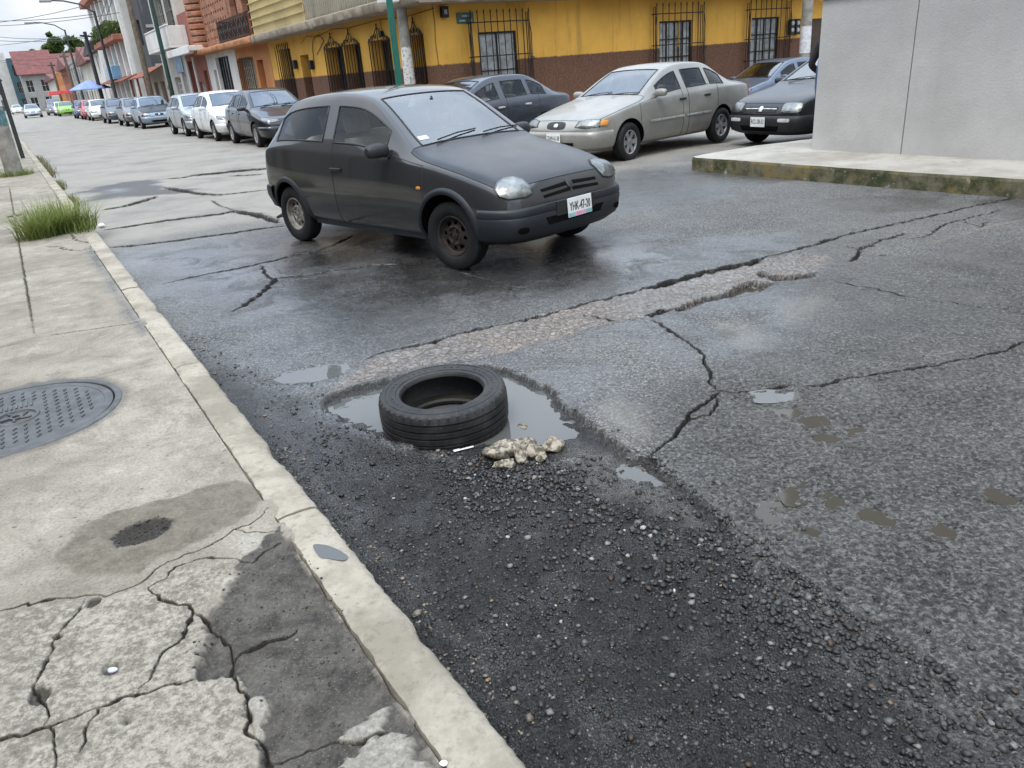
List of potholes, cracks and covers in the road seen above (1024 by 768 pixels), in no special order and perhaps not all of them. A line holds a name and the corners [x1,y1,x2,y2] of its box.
manhole cover [0,379,122,458]
pothole [311,361,636,471]
crack [0,499,415,768]
crack [559,206,1024,468]
crack [37,159,412,316]
